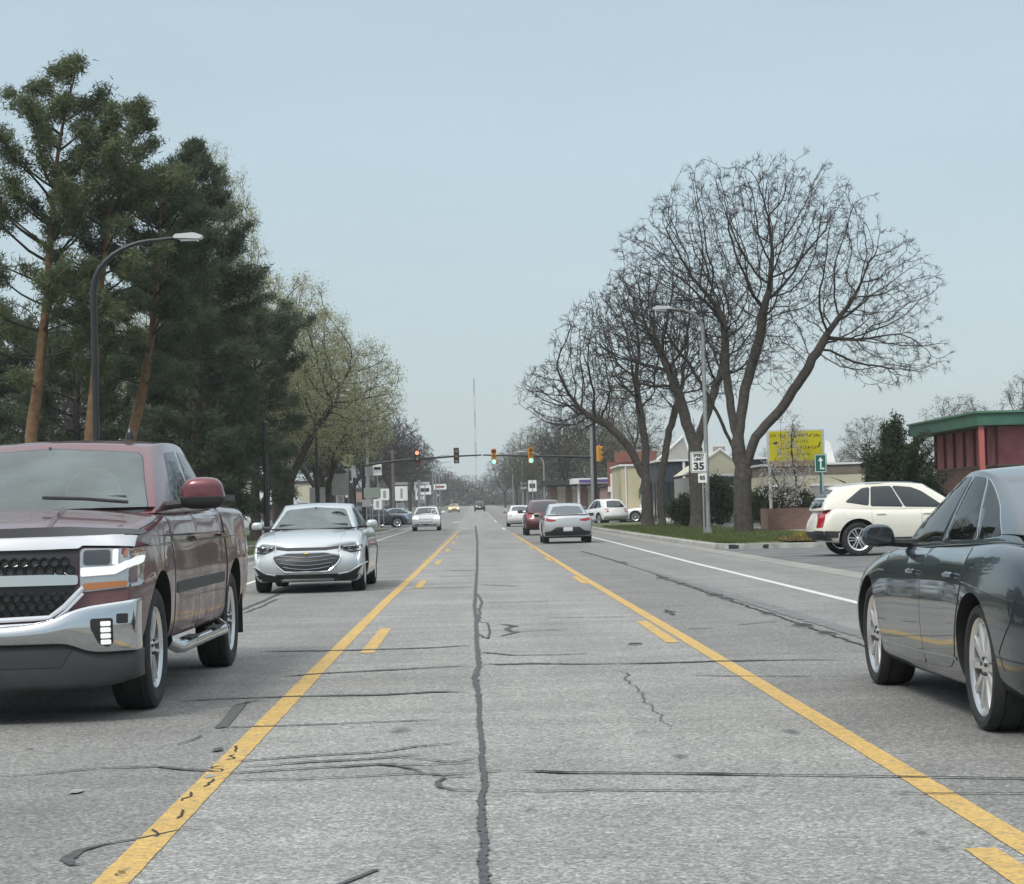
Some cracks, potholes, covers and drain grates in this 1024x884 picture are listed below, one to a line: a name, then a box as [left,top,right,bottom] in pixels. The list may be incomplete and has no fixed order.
crack [0,742,500,818]
crack [483,652,830,725]
